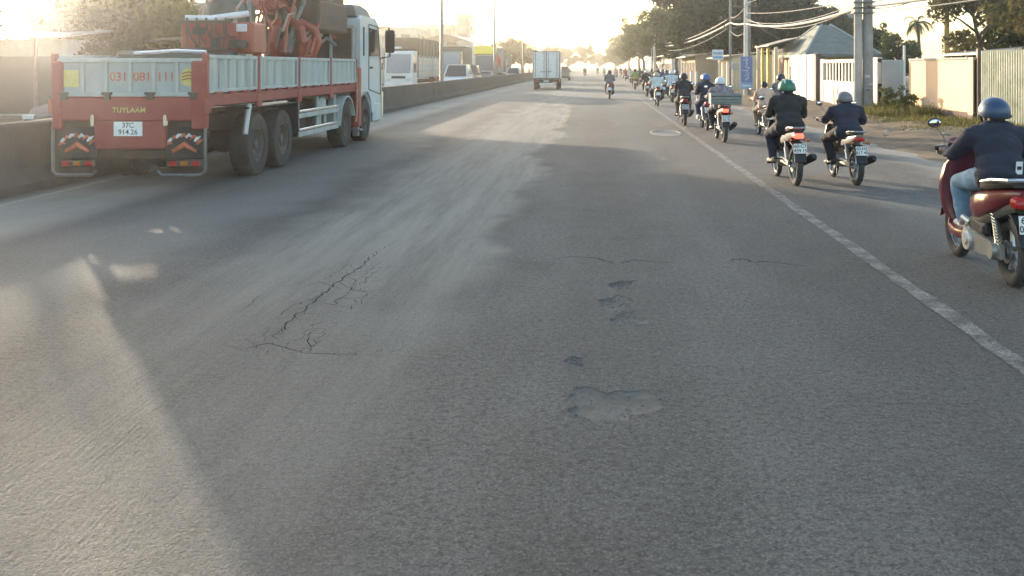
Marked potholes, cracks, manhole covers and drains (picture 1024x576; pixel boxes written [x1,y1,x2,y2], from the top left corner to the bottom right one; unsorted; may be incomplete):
pothole [561,385,668,423]
pothole [597,294,634,311]
pothole [609,311,650,326]
pothole [562,355,583,365]
crack [222,240,401,357]
pothole [606,280,637,290]
